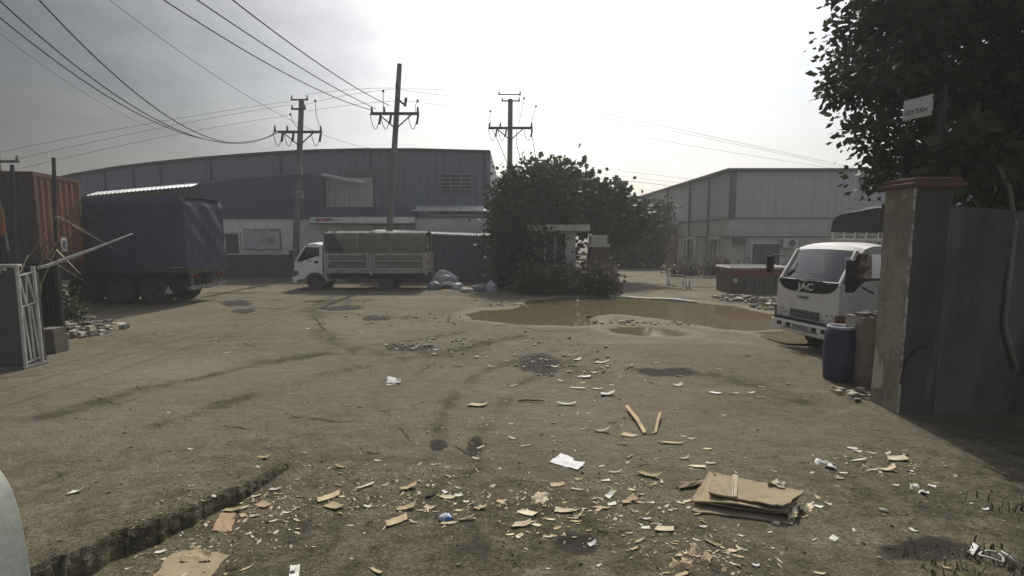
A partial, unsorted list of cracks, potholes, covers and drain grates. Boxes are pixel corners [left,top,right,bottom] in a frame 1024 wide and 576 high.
pothole [466,297,788,334]
pothole [429,439,449,452]
pothole [465,435,483,460]
pothole [517,352,564,377]
crack [223,412,366,430]
pothole [609,327,686,336]
